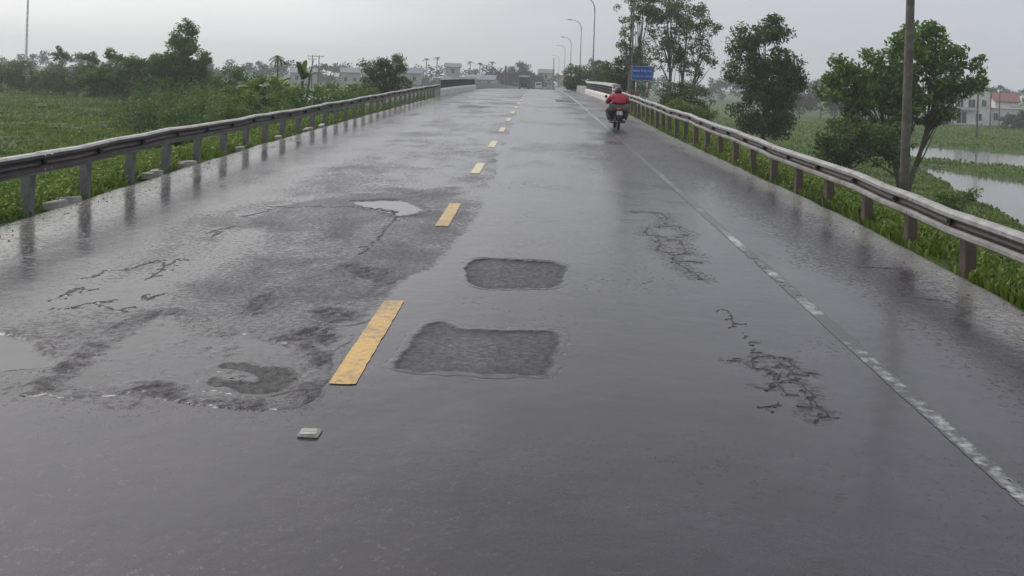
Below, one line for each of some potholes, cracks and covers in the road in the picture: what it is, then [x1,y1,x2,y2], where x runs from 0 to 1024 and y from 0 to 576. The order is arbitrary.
crack [716,309,840,423]
pothole [344,198,431,217]
crack [48,258,189,312]
crack [630,211,703,280]
pothole [18,307,334,412]
crack [208,206,432,255]
